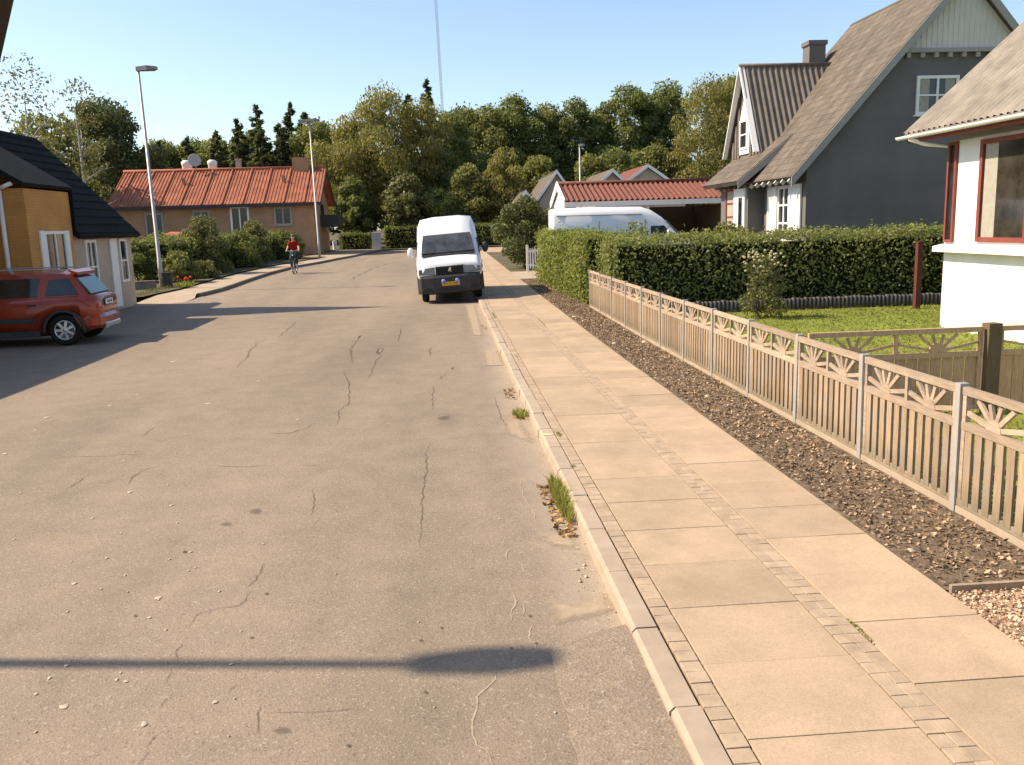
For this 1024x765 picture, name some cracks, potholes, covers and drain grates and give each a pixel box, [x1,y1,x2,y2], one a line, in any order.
crack [472,675,496,765]
